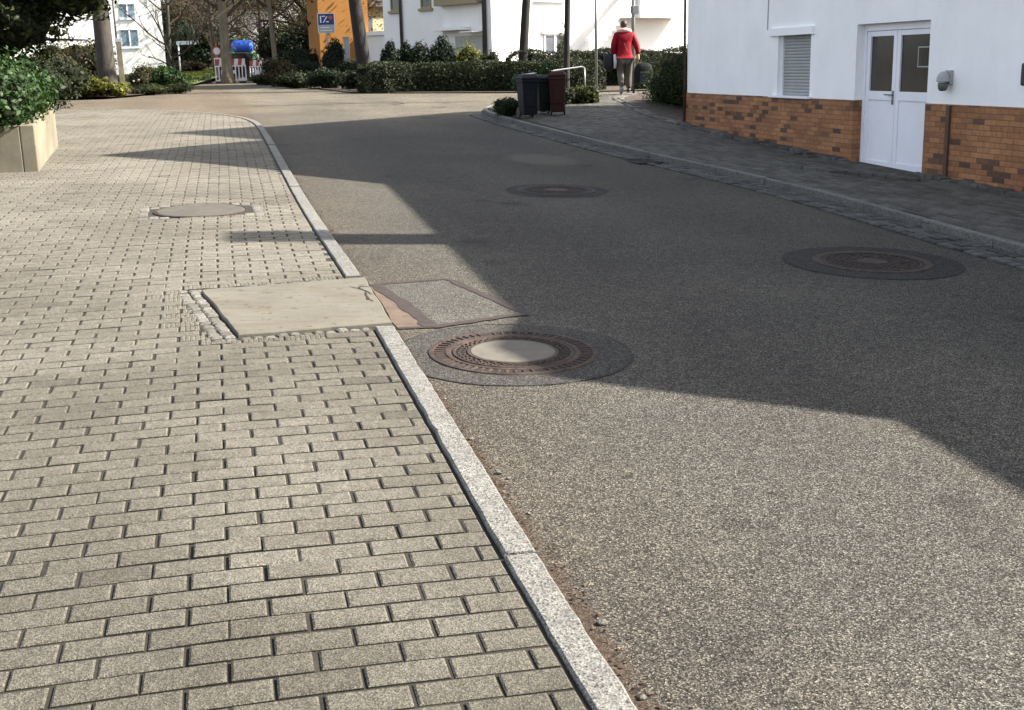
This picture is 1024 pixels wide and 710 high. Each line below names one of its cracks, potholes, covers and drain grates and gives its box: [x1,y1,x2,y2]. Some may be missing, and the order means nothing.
crack [350,286,373,301]
manhole cover [782,247,966,280]
manhole cover [404,324,634,386]
manhole cover [505,184,610,197]
manhole cover [137,203,264,220]
